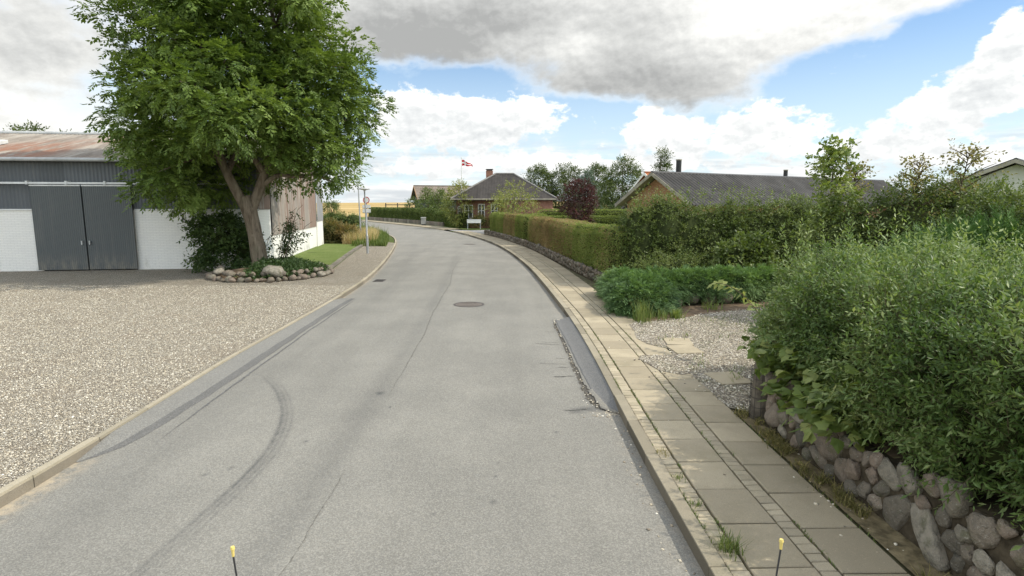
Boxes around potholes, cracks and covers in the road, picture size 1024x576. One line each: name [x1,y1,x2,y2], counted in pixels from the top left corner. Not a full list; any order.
crack [279,471,344,575]
crack [389,265,456,395]
